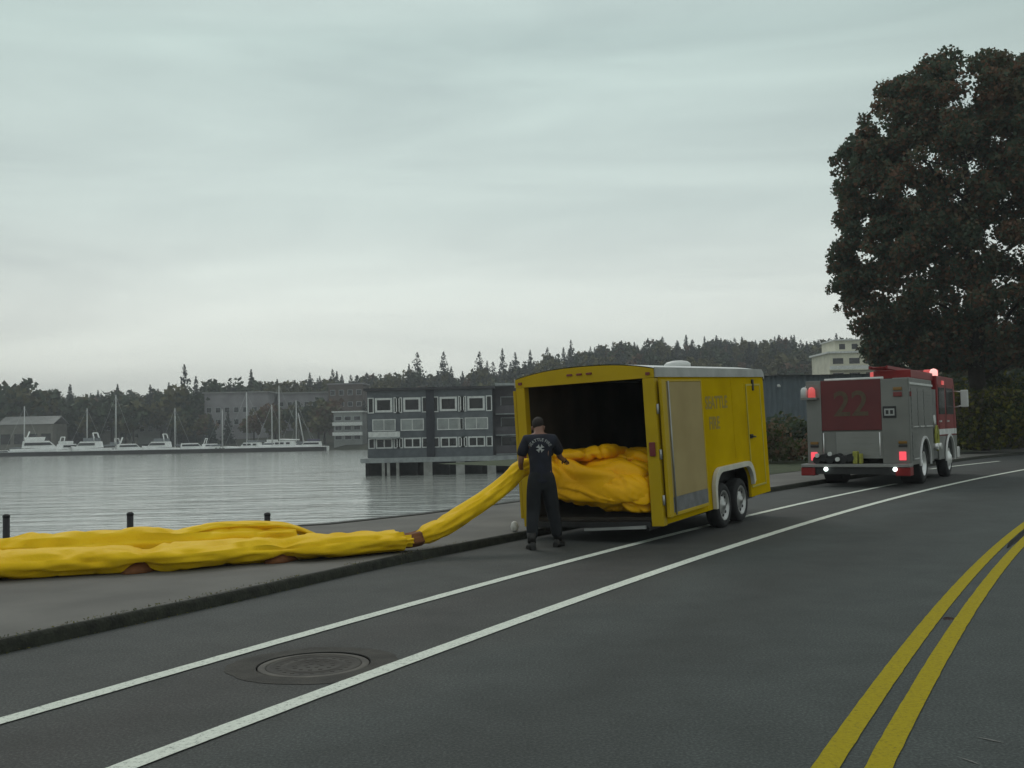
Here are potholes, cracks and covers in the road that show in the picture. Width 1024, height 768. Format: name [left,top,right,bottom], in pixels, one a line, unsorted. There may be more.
manhole cover [257,653,370,678]
